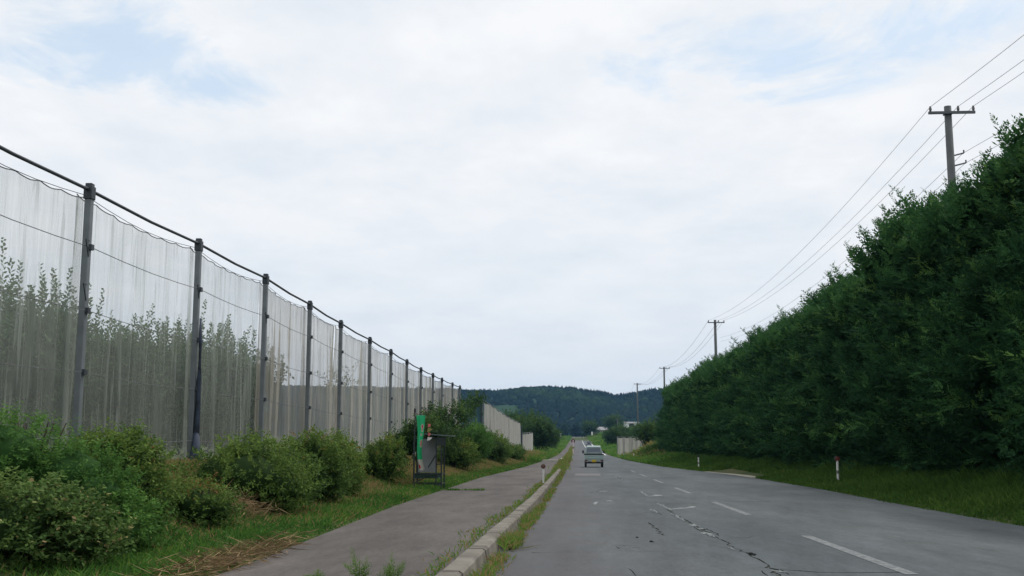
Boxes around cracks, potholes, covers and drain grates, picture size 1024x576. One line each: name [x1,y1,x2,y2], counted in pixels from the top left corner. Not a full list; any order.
crack [615,491,900,576]
